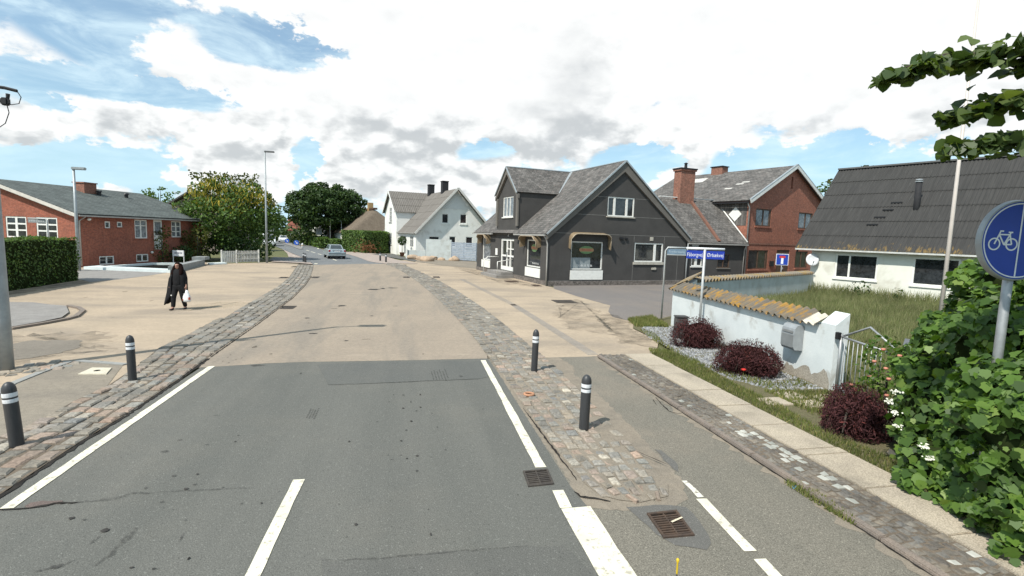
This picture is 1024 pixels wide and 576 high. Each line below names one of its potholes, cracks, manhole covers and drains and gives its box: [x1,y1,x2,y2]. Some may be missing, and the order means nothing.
crack [0,501,84,510]
utility cover [78,367,112,375]
drain grate [647,510,695,539]
drain grate [523,468,554,487]
